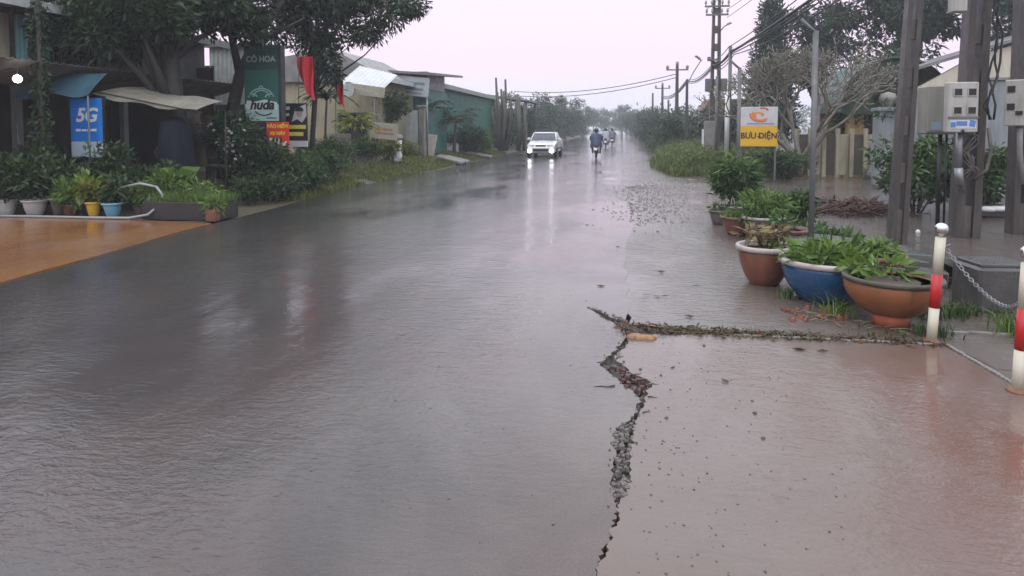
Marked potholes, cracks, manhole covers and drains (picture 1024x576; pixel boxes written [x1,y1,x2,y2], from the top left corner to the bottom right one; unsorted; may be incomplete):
crack [587,306,657,558]
